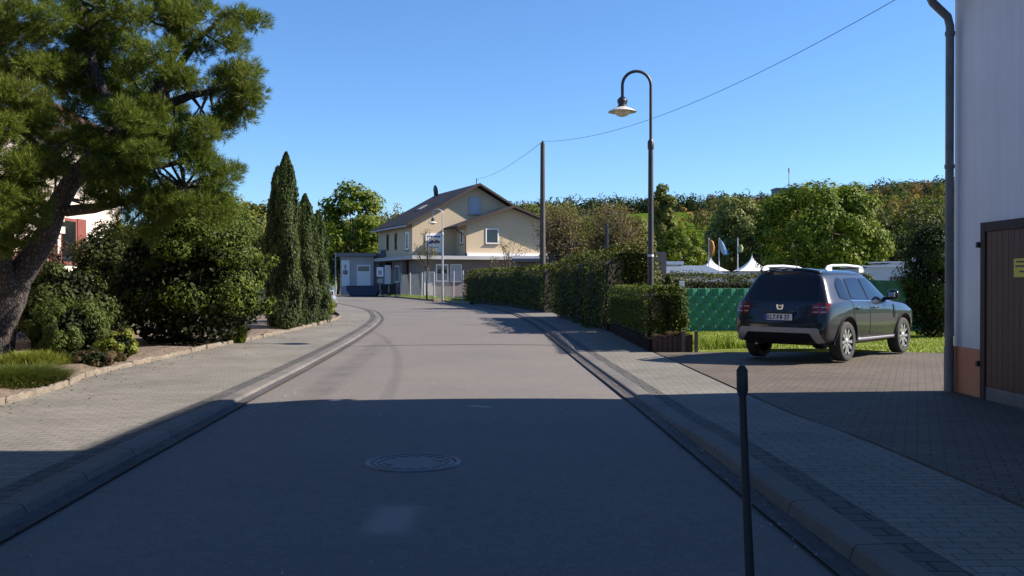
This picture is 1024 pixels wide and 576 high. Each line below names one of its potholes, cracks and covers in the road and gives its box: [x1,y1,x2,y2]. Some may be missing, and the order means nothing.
manhole cover [365,453,461,473]
